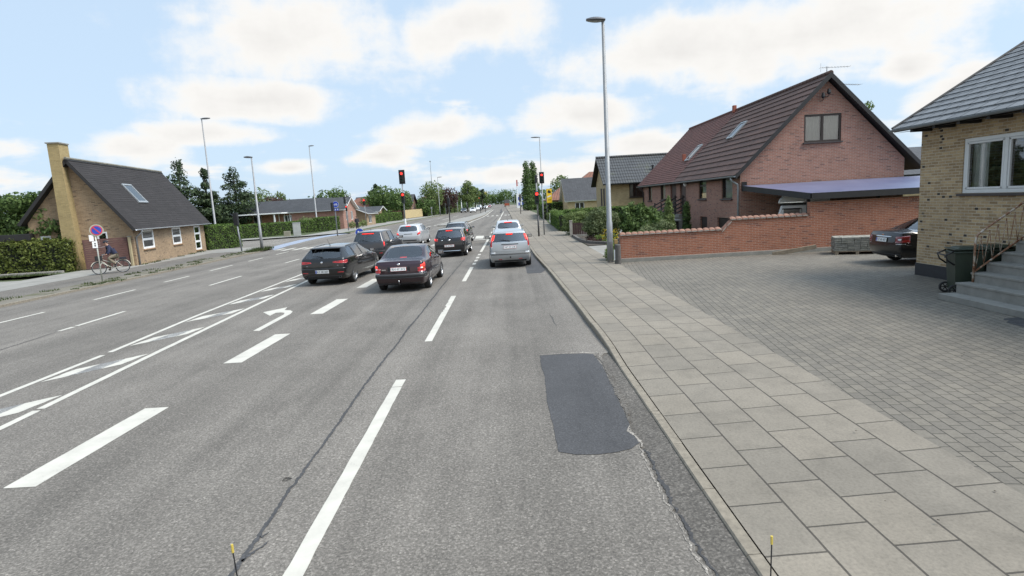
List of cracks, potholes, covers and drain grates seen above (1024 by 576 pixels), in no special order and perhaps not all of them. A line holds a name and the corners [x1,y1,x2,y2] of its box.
crack [642,449,719,576]
